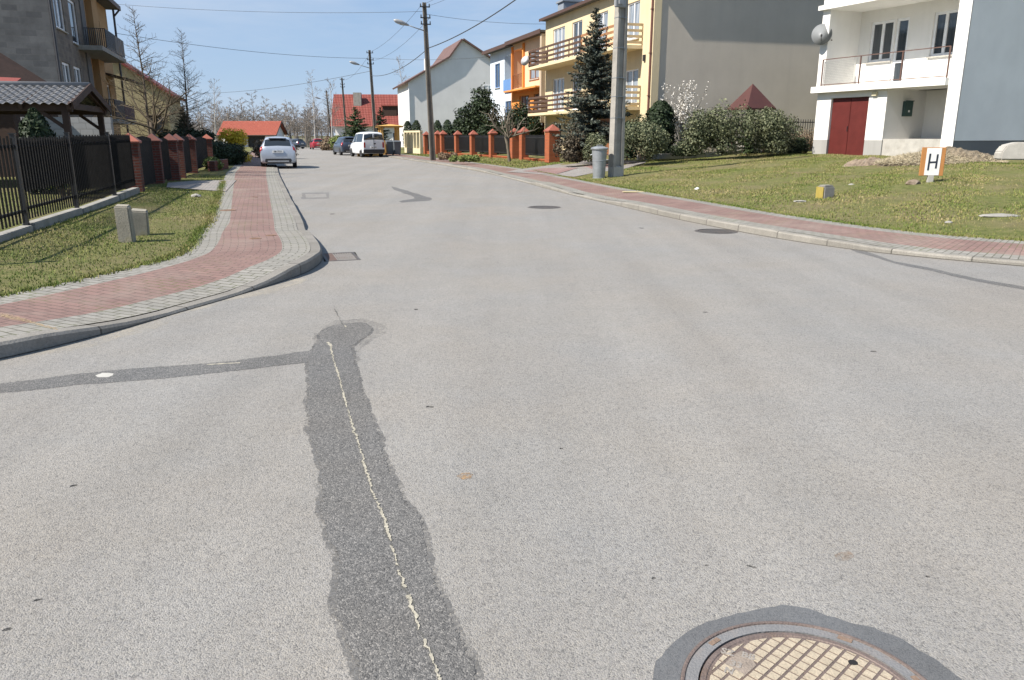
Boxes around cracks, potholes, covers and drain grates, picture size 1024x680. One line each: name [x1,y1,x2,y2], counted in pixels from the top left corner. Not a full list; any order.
drain grate [322,252,361,262]
crack [326,309,442,680]
manhole cover [681,621,927,680]
